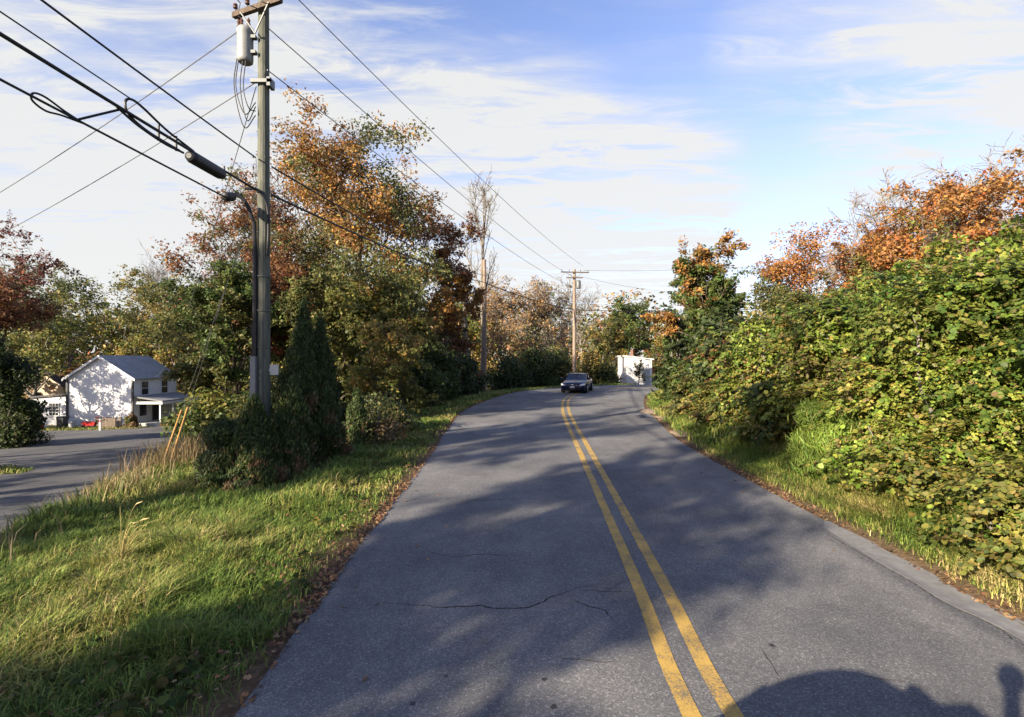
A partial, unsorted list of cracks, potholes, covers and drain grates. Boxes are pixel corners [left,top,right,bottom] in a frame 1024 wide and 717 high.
crack [373,583,621,619]
